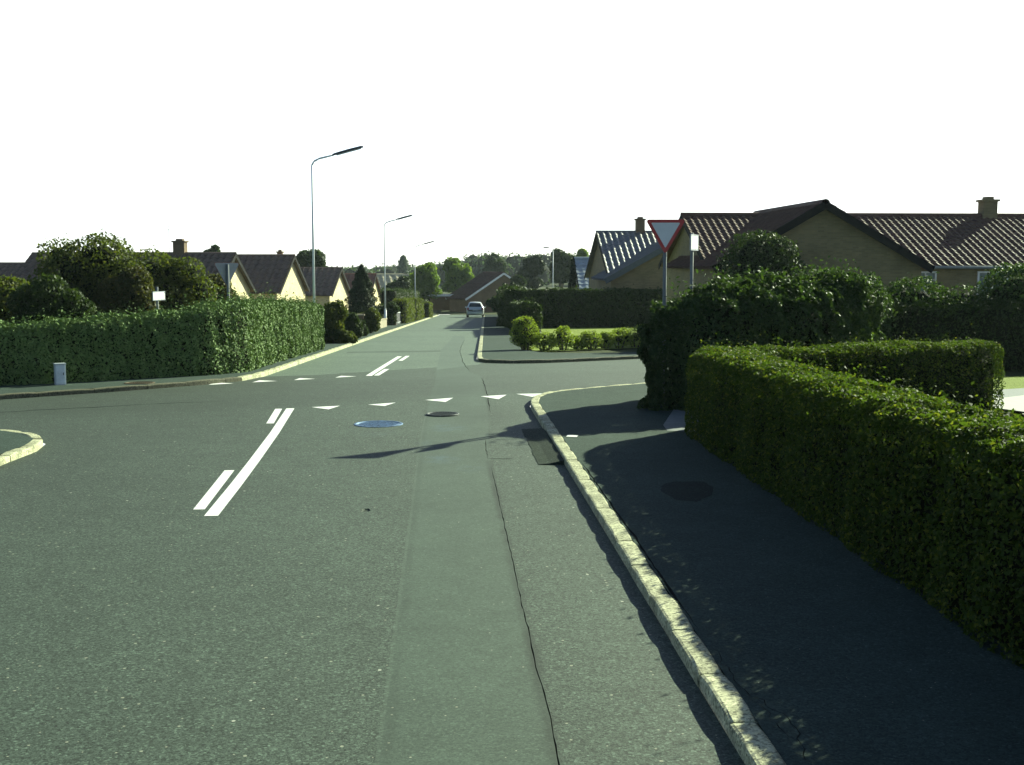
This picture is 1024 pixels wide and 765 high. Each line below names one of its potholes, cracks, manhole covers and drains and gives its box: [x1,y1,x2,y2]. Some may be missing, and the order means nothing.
manhole cover [354,420,403,428]
crack [710,640,814,764]
